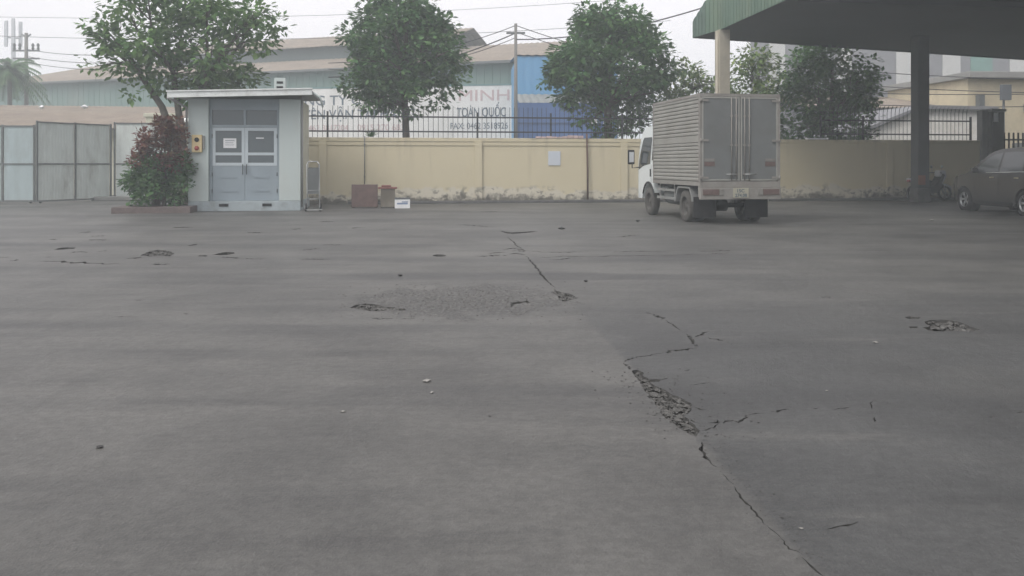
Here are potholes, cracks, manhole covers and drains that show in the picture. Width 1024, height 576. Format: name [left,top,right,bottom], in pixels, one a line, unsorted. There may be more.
pothole [905,316,980,332]
crack [623,313,738,370]
crack [674,377,898,431]
